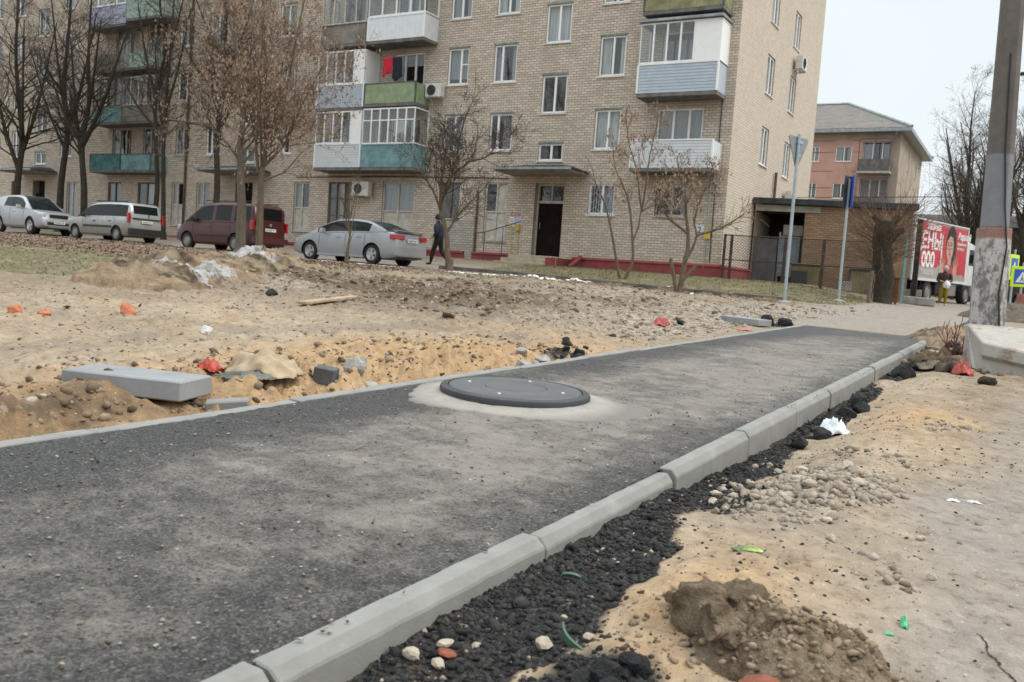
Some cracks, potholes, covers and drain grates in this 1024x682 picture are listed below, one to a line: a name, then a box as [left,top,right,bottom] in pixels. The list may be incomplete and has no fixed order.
manhole cover [408,376,652,423]
crack [977,633,1017,682]
